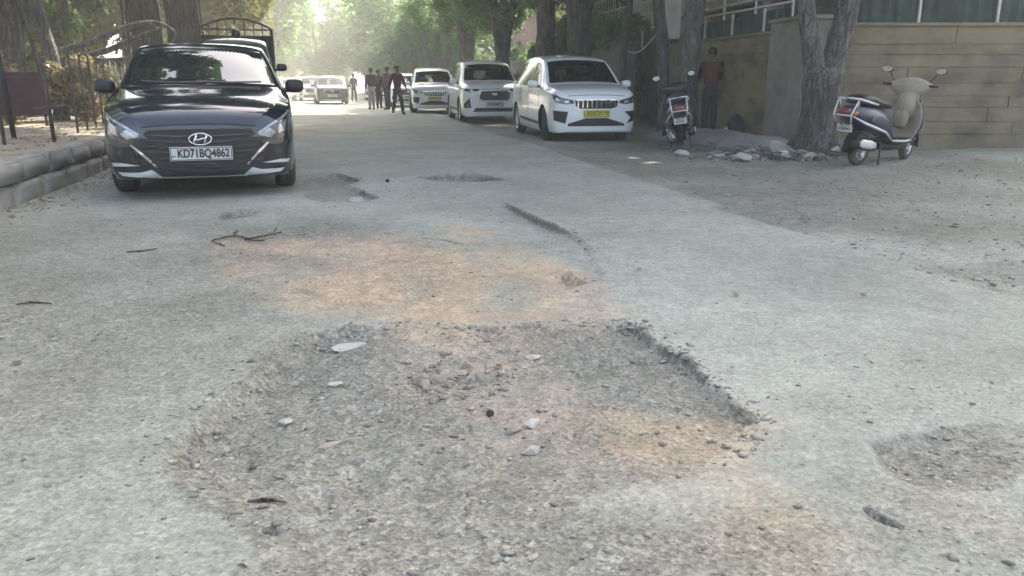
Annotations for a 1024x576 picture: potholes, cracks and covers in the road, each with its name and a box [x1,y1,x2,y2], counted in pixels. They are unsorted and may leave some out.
pothole [157,320,761,576]
pothole [858,418,1024,496]
pothole [300,172,381,202]
pothole [416,172,511,182]
